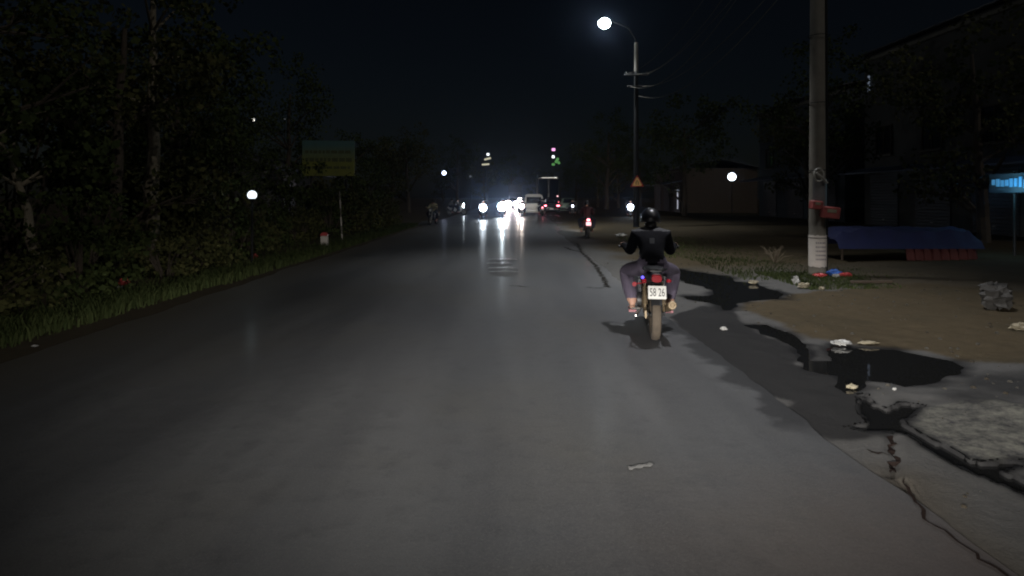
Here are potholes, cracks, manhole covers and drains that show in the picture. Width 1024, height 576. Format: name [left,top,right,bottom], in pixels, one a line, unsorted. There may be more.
crack [867,436,1009,576]
crack [564,243,609,288]
